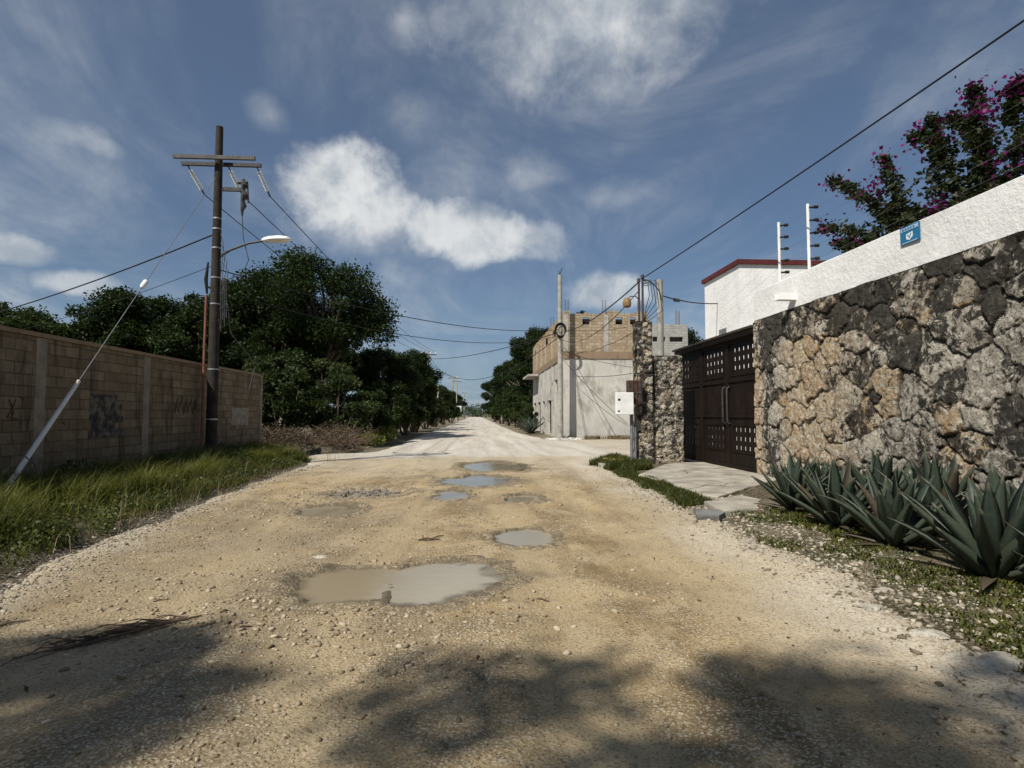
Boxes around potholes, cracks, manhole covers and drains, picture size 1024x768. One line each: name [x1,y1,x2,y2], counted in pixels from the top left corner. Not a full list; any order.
pothole [427,474,528,489]
pothole [482,526,567,551]
pothole [451,460,541,473]
pothole [284,501,373,519]
pothole [425,487,478,502]
pothole [309,486,426,501]
pothole [499,491,551,505]
pothole [248,555,534,616]
